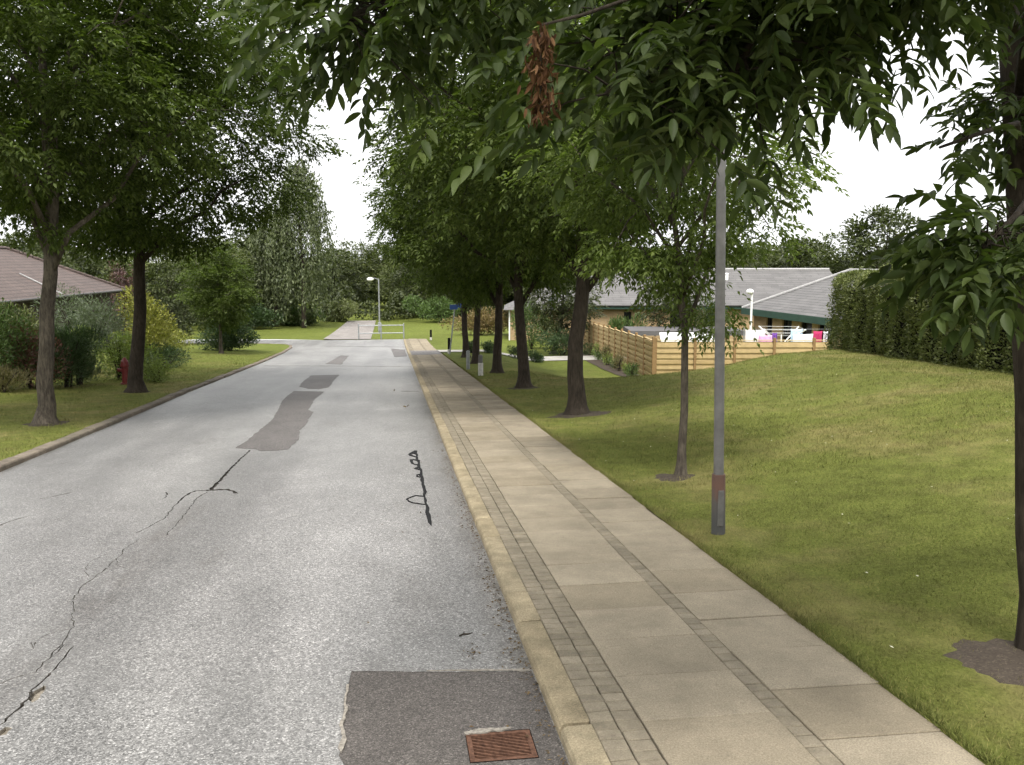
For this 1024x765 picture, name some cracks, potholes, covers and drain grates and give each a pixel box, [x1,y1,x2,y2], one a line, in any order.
drain grate [464,727,539,763]
crack [0,539,139,725]
crack [139,450,250,535]
